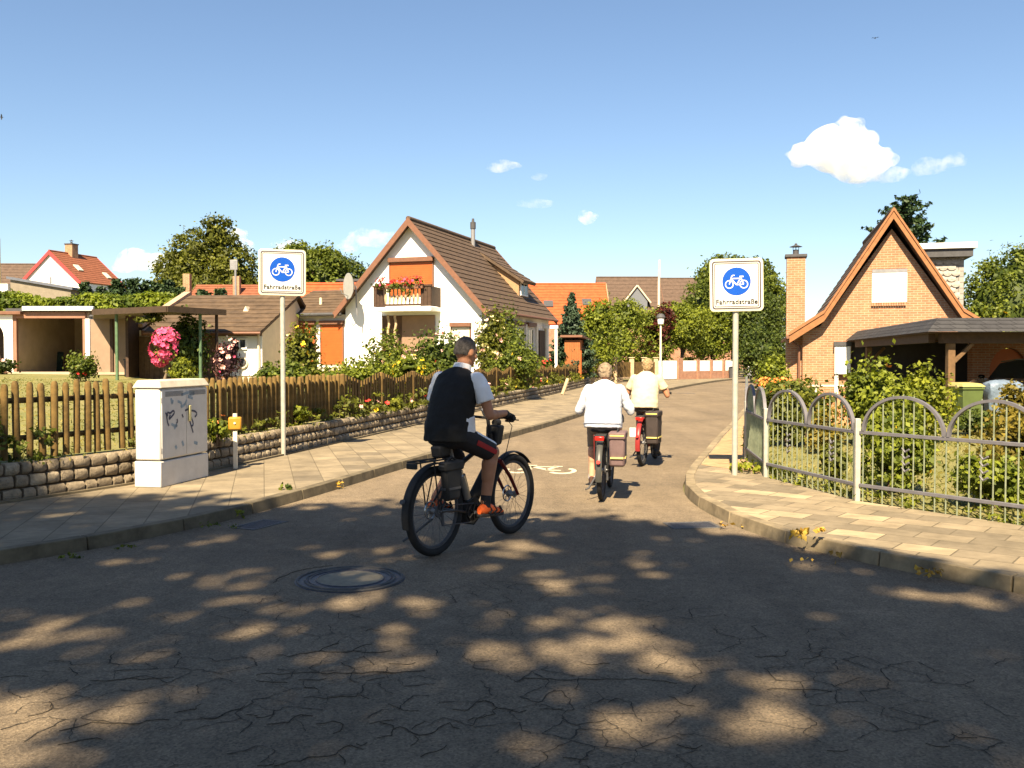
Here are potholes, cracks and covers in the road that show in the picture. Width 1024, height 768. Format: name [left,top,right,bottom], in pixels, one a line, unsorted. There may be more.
crack [1,565,1017,768]
manhole cover [294,566,405,593]
drain grate [662,521,723,529]
drain grate [229,519,288,530]
